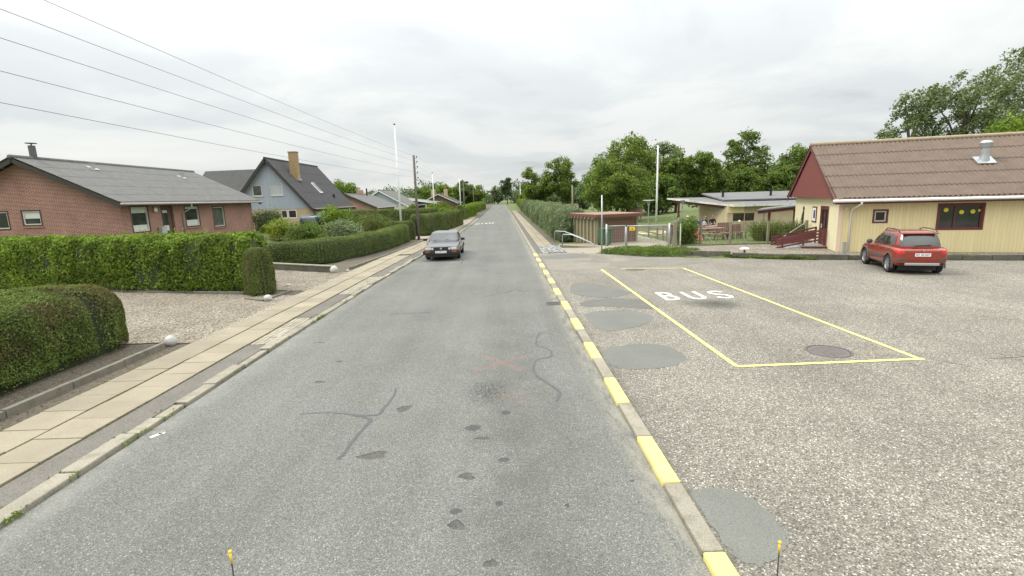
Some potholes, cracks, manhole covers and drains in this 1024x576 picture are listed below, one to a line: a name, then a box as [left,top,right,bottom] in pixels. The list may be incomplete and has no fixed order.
pothole [356,451,387,460]
manhole cover [804,345,854,358]
pothole [447,519,465,530]
